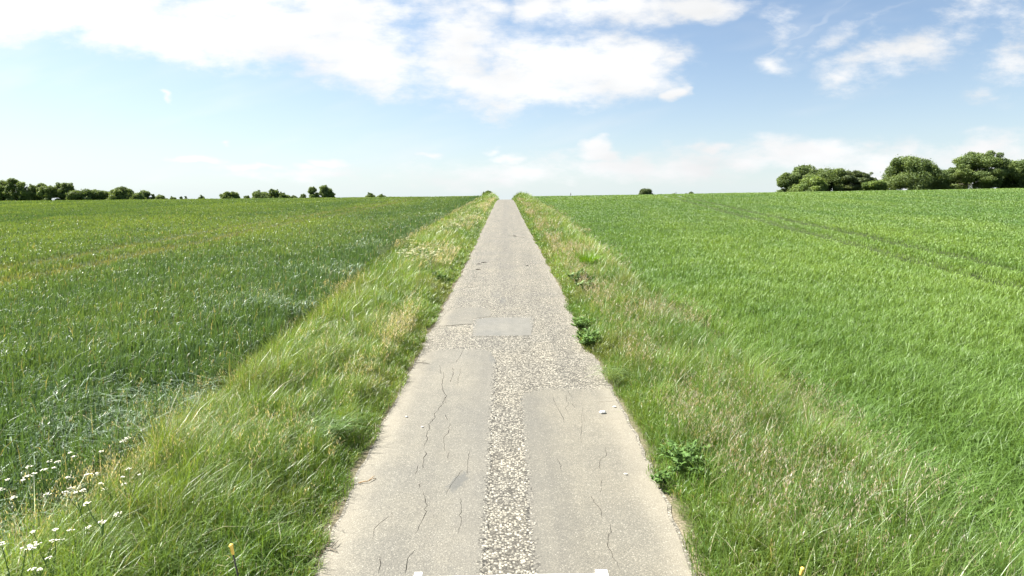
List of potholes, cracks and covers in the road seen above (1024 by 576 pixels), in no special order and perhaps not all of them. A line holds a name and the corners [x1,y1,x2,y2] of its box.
crack [405,349,469,572]
